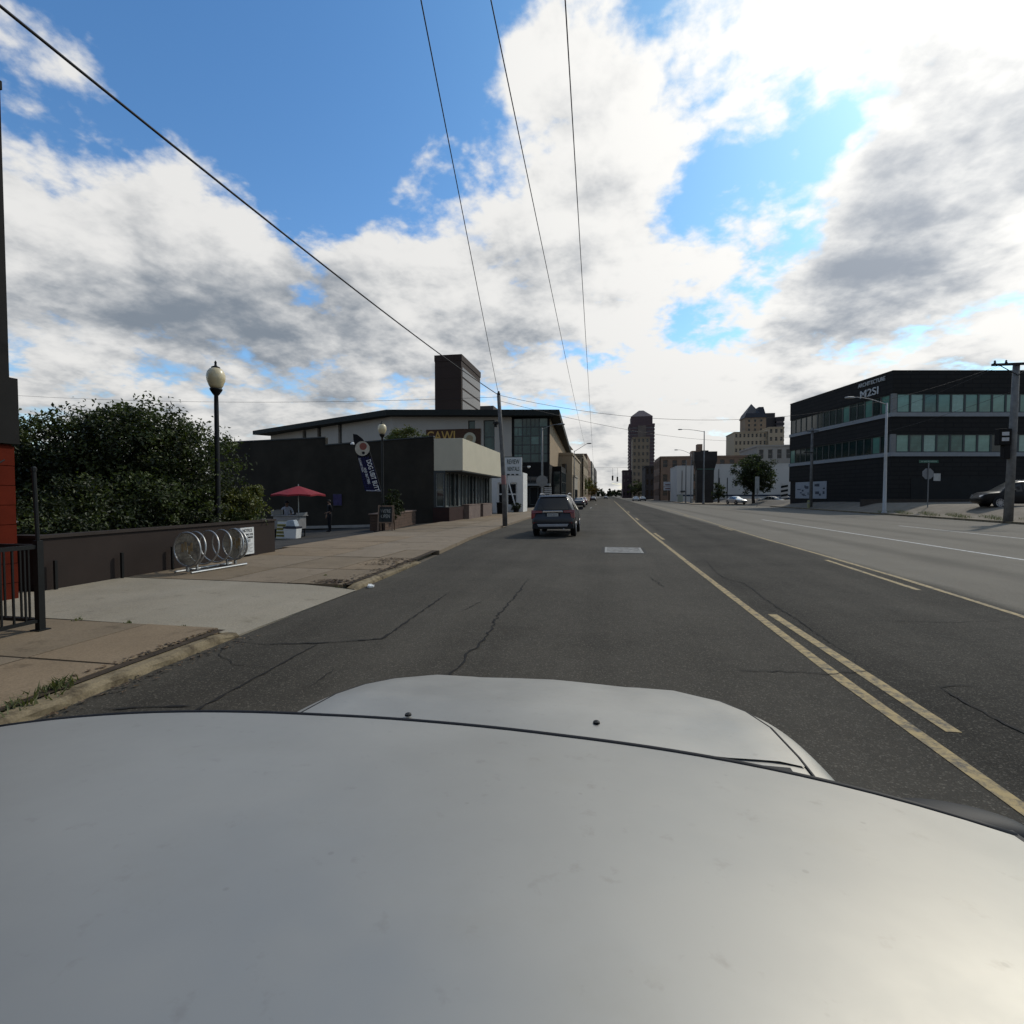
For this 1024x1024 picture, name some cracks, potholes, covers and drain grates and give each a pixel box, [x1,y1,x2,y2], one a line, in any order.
crack [910,679,1024,733]
crack [449,581,526,675]
